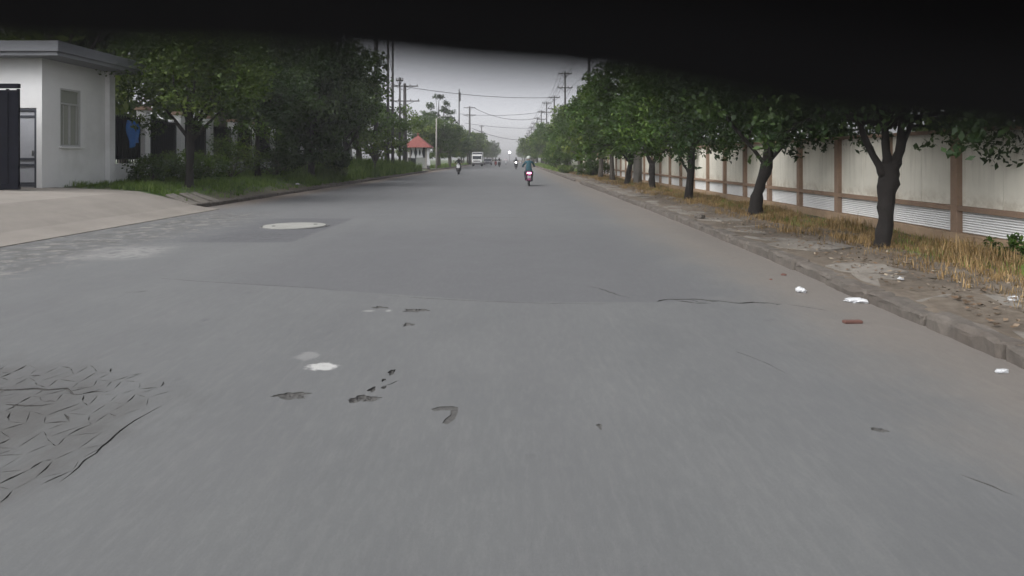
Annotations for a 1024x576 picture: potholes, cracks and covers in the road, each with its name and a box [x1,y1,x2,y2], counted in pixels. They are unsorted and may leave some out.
manhole cover [259,222,329,230]
crack [0,366,166,503]
pothole [349,369,396,403]
crack [657,299,828,311]
pothole [271,392,311,400]
pothole [432,406,458,424]
